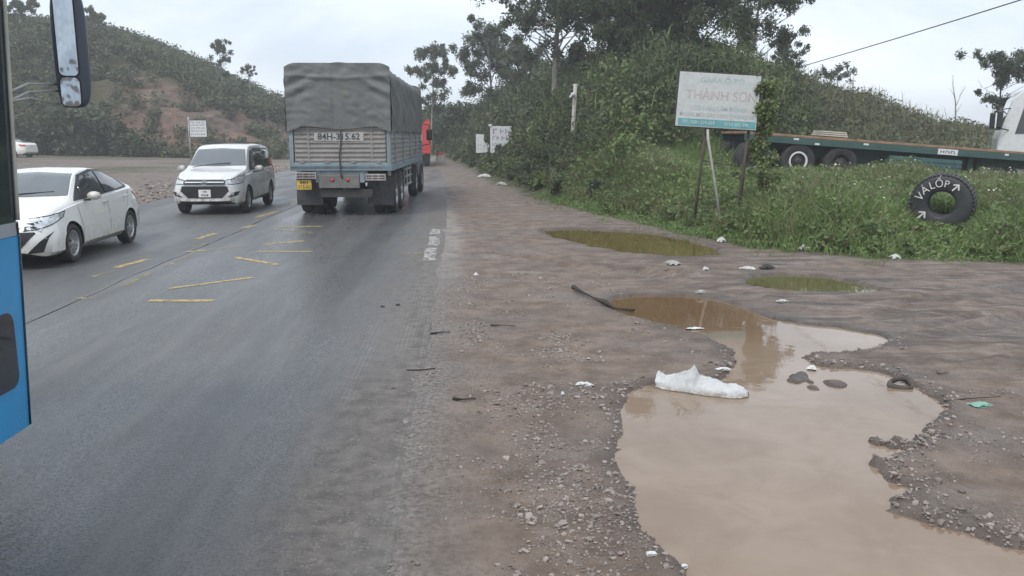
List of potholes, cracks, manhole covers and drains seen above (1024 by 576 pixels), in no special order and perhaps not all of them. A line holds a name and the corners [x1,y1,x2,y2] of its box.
pothole [530,227,734,259]
pothole [729,270,904,295]
pothole [580,290,1024,576]
